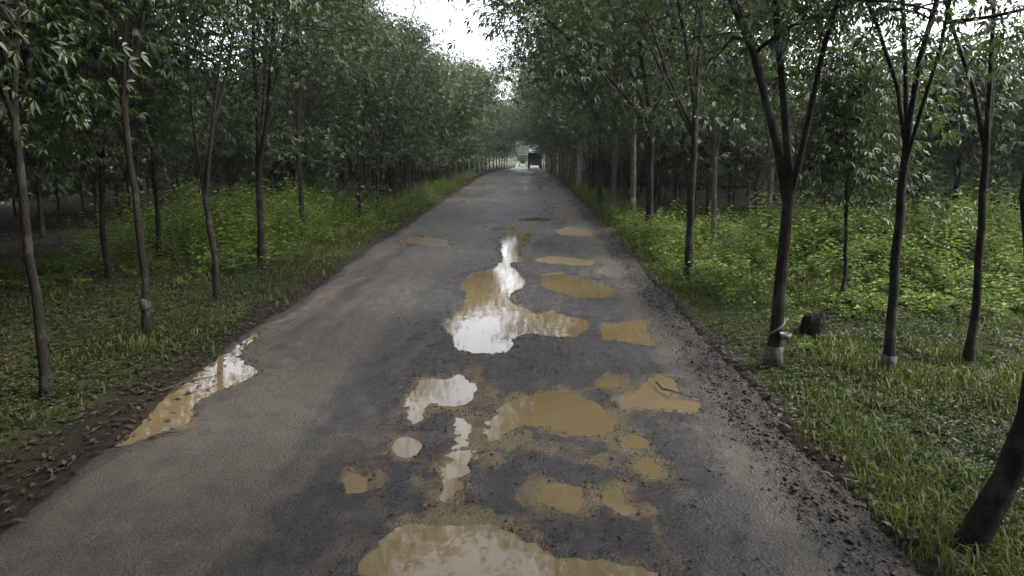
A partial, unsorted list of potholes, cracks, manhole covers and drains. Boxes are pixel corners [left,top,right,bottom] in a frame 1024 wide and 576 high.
pothole [380,432,431,462]
pothole [475,384,635,448]
pothole [591,481,653,521]
pothole [549,227,600,237]
pothole [625,454,675,483]
pothole [340,510,682,576]
